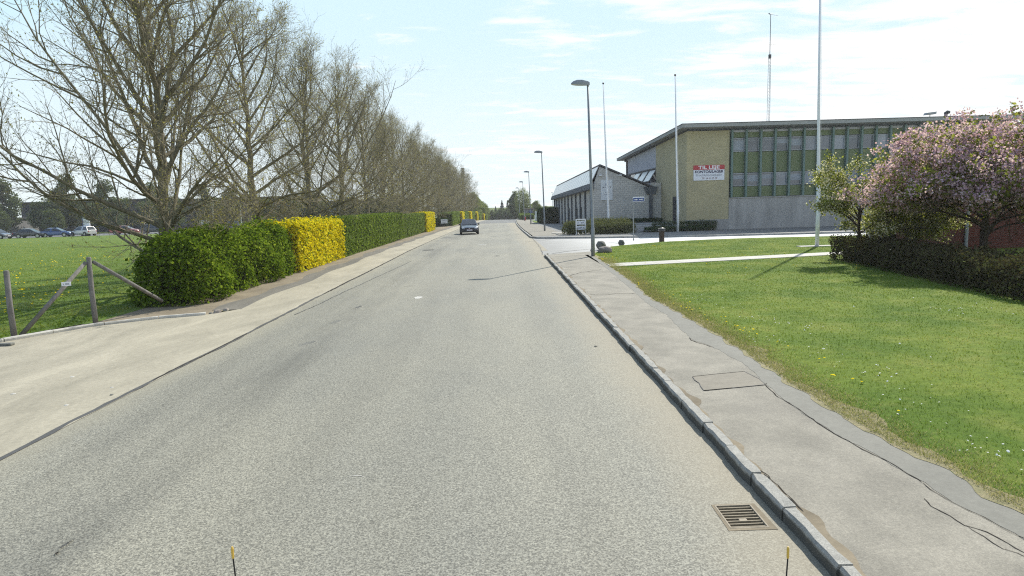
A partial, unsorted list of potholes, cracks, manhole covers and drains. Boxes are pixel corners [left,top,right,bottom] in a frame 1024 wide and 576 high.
drain grate [712,503,778,531]
